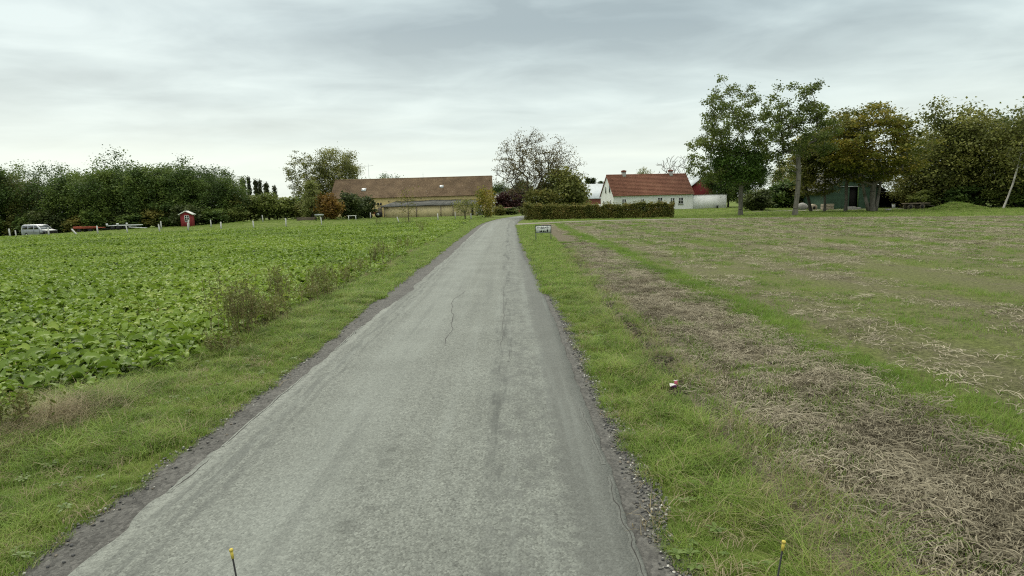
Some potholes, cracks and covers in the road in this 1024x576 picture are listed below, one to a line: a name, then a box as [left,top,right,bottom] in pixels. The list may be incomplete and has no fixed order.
crack [444,291,465,346]
